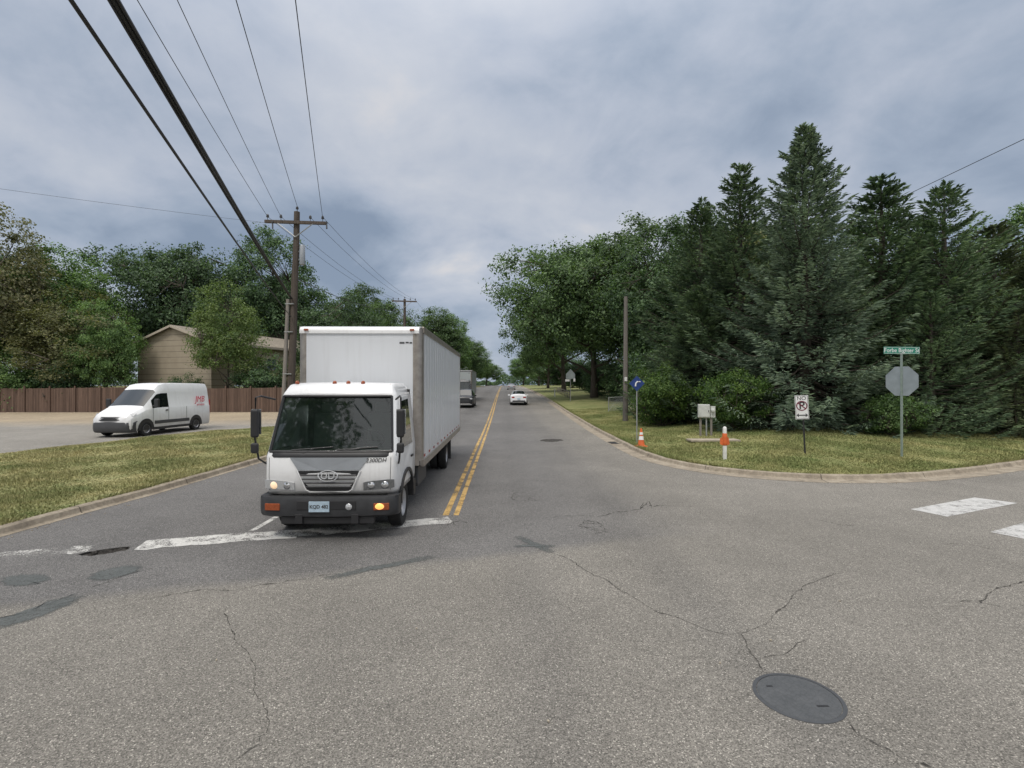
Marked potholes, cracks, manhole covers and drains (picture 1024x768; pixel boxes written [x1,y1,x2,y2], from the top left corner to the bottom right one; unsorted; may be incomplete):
crack [511,492,665,534]
manhole cover [752,673,848,724]
pothole [78,547,130,556]
crack [551,552,840,670]
crack [224,613,270,762]
crack [851,725,933,768]
